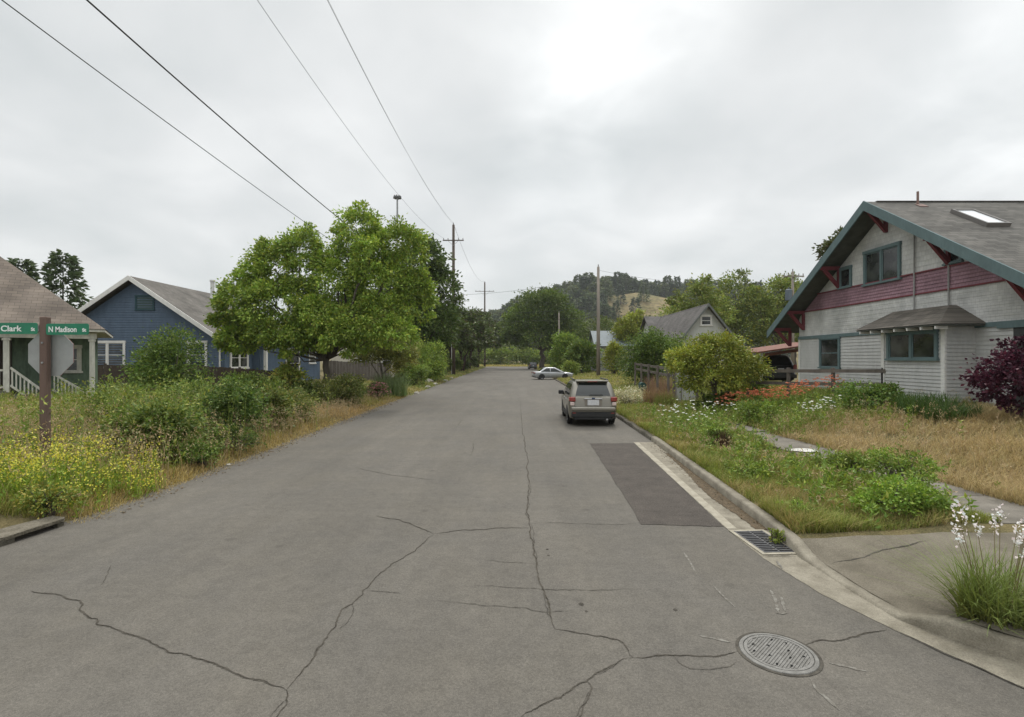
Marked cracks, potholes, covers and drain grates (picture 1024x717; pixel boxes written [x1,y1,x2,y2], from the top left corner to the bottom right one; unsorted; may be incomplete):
crack [32,405,734,717]
drain grate [729,529,796,555]
crack [834,541,920,563]
manhole cover [735,632,824,677]
crack [808,629,887,644]
